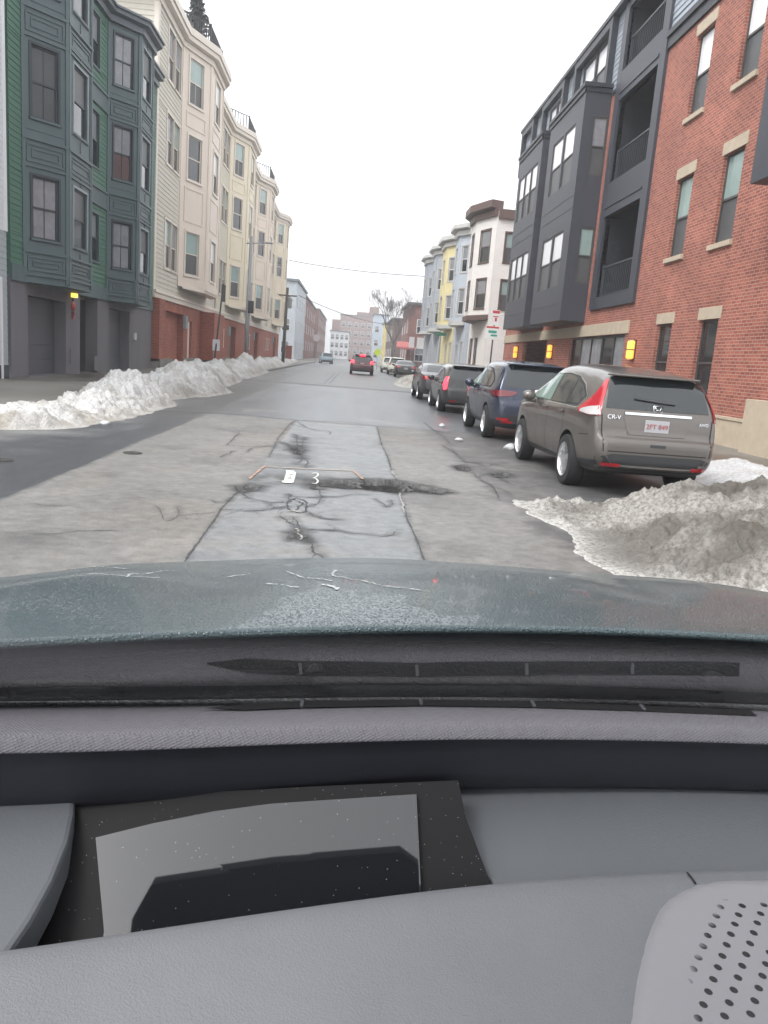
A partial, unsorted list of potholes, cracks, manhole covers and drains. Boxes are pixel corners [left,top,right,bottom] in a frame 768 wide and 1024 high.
crack [201,412,369,467]
pothole [311,479,363,489]
crack [143,488,398,558]
pothole [403,484,453,495]
crack [425,423,519,498]
pothole [353,478,413,493]
pothole [235,483,262,492]
